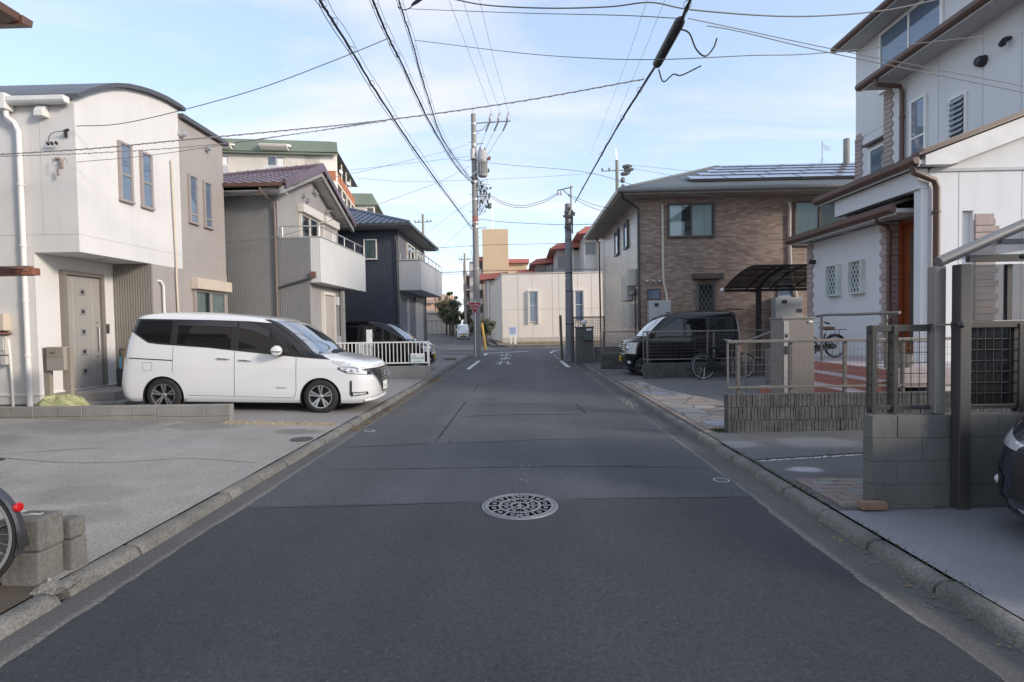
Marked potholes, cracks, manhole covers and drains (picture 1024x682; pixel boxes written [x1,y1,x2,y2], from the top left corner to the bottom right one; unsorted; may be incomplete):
manhole cover [481,493,558,520]
crack [0,447,257,463]
